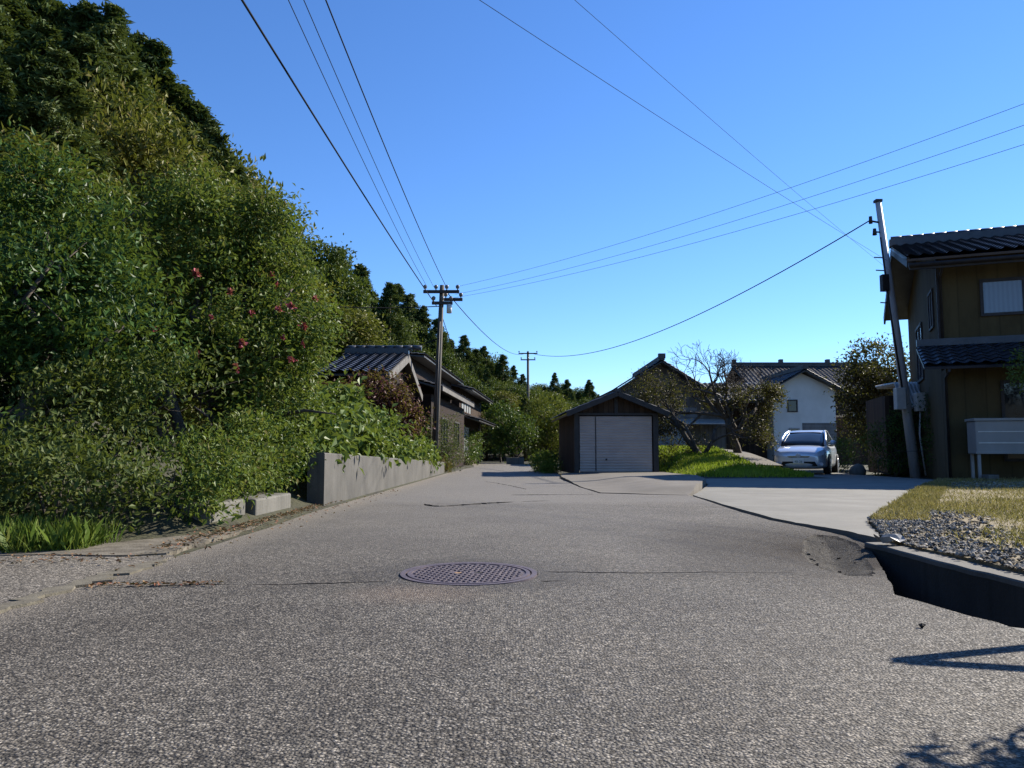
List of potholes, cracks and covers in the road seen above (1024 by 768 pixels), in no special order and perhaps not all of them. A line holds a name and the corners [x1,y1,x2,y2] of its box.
manhole cover [400,562,537,586]
pothole [802,534,875,576]
